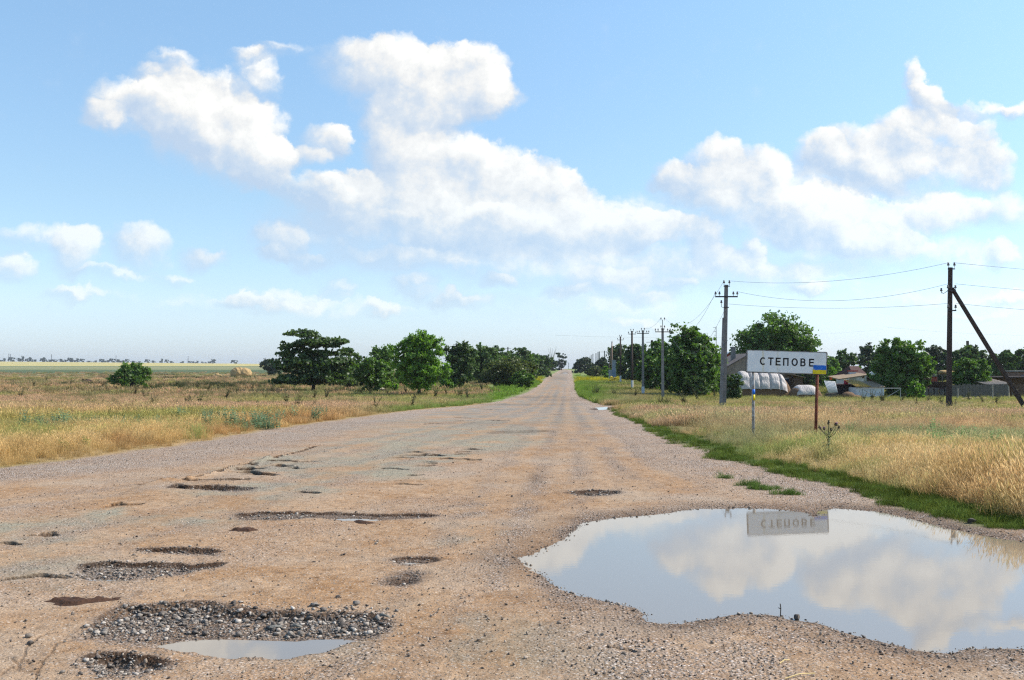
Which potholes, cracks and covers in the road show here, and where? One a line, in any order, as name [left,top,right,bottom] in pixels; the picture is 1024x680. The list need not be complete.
pothole [60,559,230,582]
crack [0,631,74,680]
pothole [385,556,445,565]
pothole [63,599,399,661]
pothole [163,482,261,493]
pothole [228,510,442,521]
pothole [59,649,180,680]
pothole [515,508,1024,655]
pothole [377,570,431,587]
pothole [132,545,224,557]
